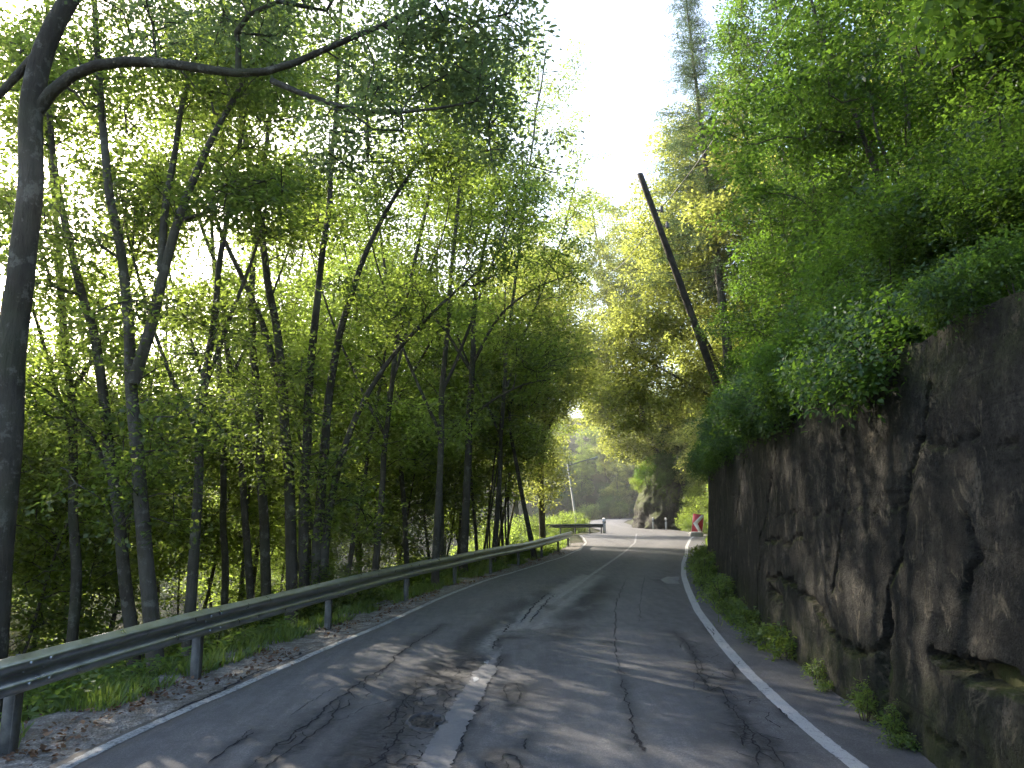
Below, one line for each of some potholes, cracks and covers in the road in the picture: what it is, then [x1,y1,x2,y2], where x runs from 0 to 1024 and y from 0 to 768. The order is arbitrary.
crack [603,577,646,751]
crack [209,625,441,768]
pothole [405,711,446,732]
crack [675,634,795,767]
crack [363,656,480,768]
